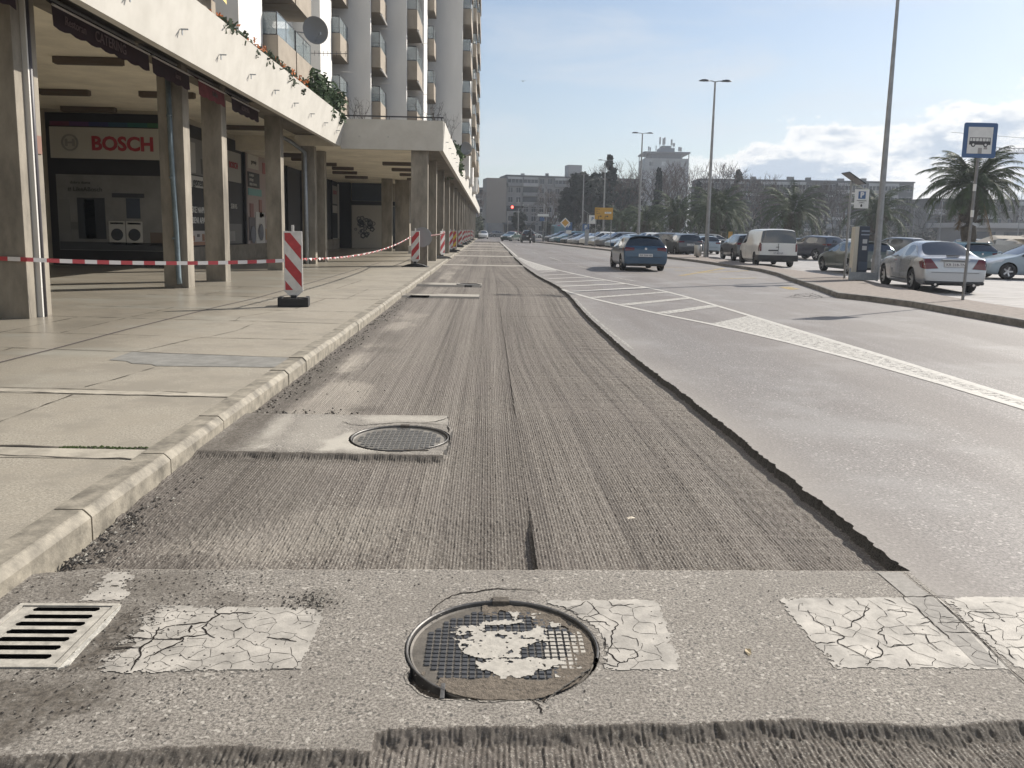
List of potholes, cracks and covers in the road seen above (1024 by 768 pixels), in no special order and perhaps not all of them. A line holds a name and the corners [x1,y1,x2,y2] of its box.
manhole cover [405,597,599,702]
crack [562,601,663,670]
manhole cover [350,424,449,452]
drain grate [0,603,121,670]
crack [798,595,1024,668]
crack [95,605,320,672]
